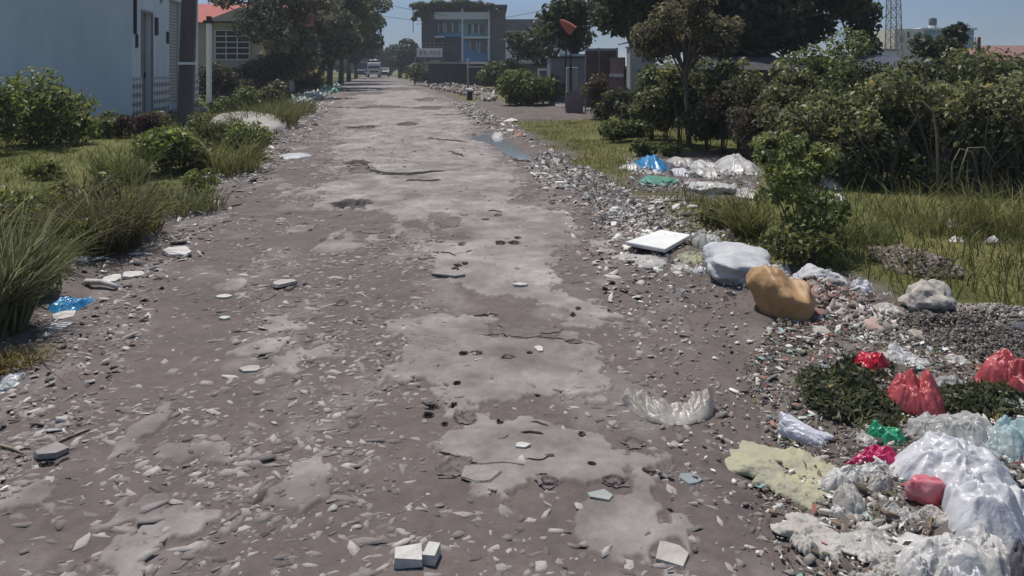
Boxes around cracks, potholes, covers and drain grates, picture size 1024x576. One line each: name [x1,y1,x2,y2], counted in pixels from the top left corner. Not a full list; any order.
pothole [330,198,373,209]
pothole [540,475,558,489]
crack [352,112,498,182]
pothole [601,473,630,488]
crack [436,451,558,487]
